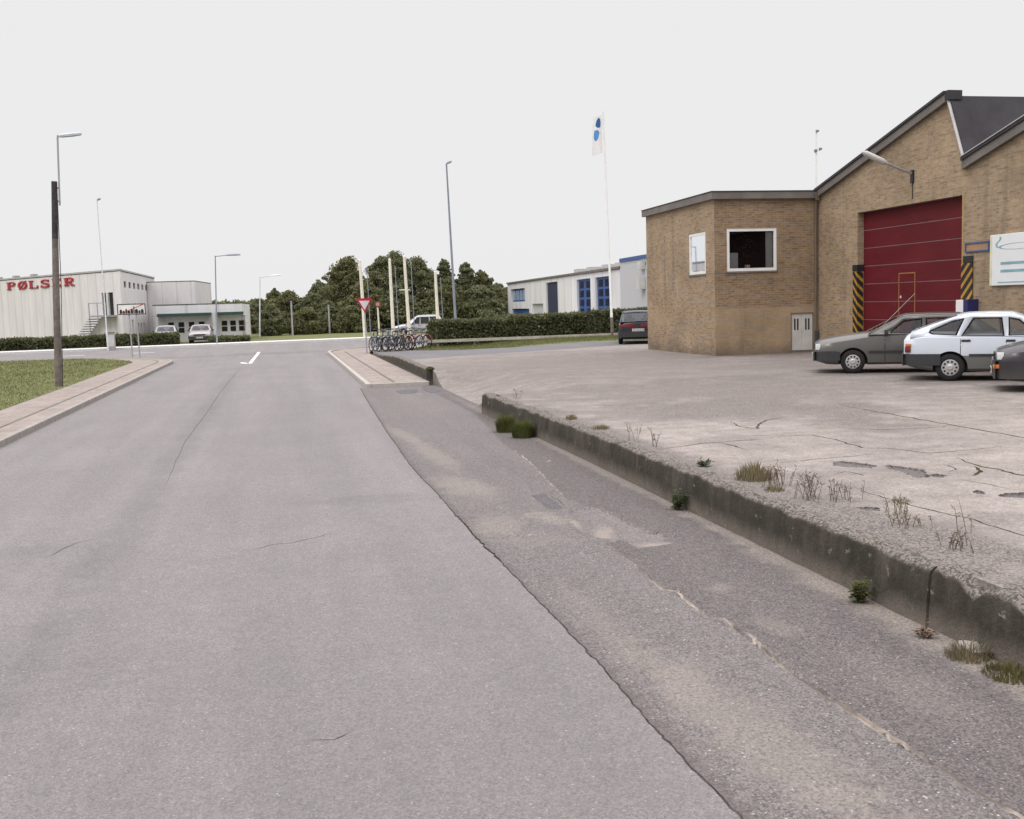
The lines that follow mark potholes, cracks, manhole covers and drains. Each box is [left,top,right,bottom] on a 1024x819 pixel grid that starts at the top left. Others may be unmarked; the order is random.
crack [360,389,1024,819]
